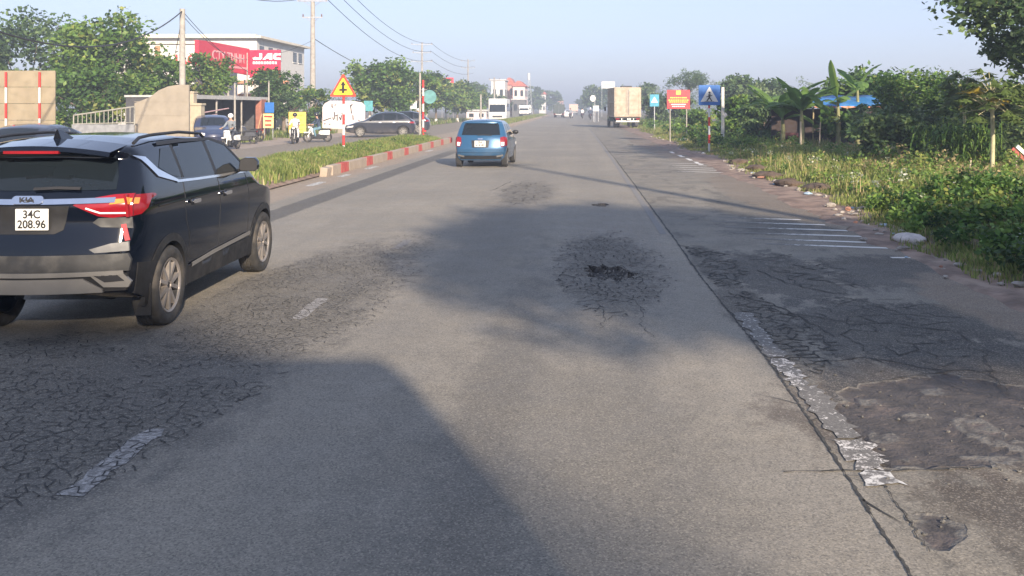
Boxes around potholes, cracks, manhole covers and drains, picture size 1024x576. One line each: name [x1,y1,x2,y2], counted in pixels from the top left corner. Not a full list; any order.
crack [0,233,440,508]
crack [551,231,677,336]
pothole [913,512,968,551]
pothole [581,264,638,281]
crack [681,245,1024,399]
